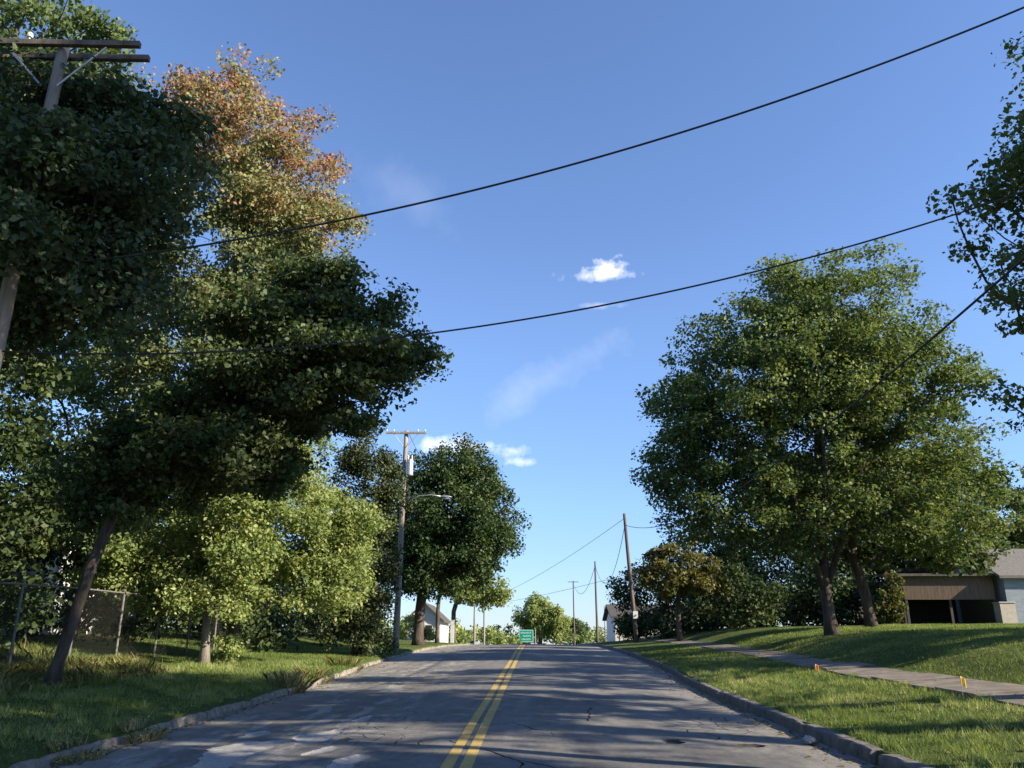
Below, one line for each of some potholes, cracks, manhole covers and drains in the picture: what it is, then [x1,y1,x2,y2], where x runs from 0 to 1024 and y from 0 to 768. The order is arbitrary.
crack [338,712,444,746]
crack [449,740,555,768]
crack [684,717,785,740]
